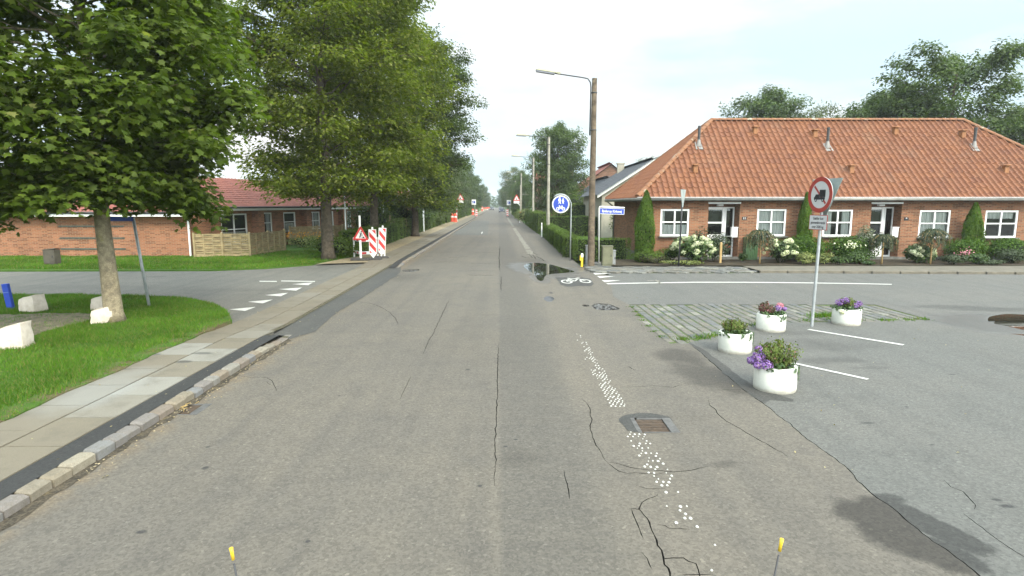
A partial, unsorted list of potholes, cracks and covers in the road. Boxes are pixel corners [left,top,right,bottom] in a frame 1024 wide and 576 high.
crack [587,404,711,576]
drain grate [630,418,680,433]
crack [473,246,502,486]
crack [945,481,1024,557]
